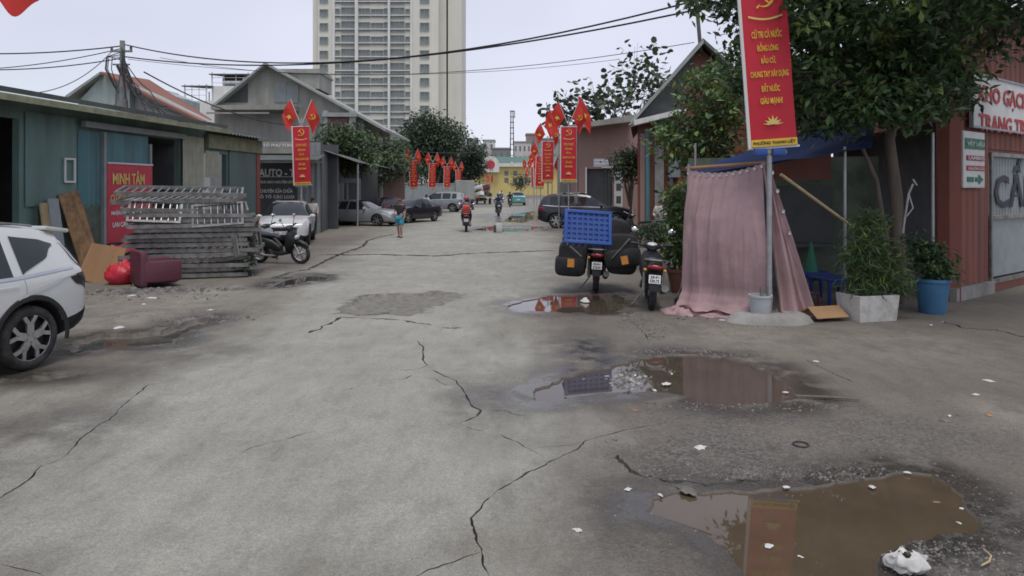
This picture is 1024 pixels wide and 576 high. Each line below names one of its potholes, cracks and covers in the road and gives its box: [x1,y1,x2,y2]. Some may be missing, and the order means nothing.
pothole [645,471,981,576]
crack [309,317,708,576]
crack [271,234,393,278]
crack [0,384,149,498]
pothole [507,294,626,313]
pothole [270,274,329,287]
crack [944,322,1024,337]
pothole [533,354,798,405]
pothole [67,317,212,353]
